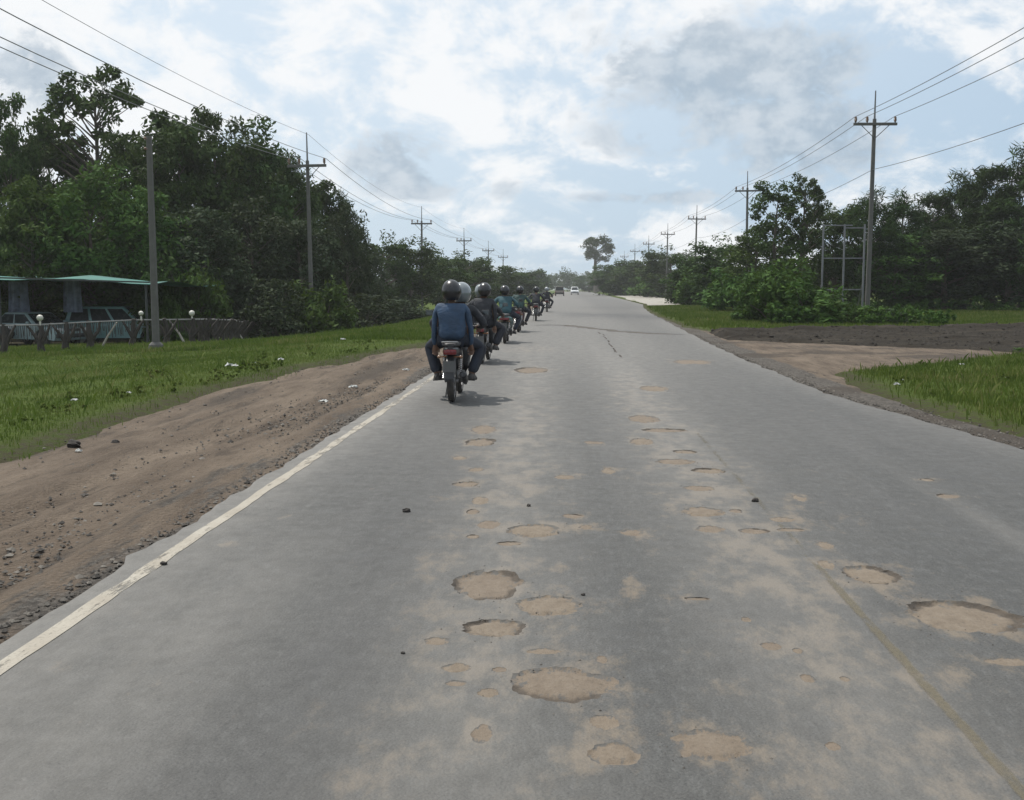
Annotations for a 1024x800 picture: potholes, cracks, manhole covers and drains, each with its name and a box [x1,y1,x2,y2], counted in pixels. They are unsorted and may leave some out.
pothole [471,425,497,434]
pothole [586,742,641,765]
pothole [470,724,493,744]
pothole [462,619,526,637]
pothole [840,565,902,585]
crack [563,325,684,357]
pothole [465,438,496,446]
pothole [670,728,754,762]
pothole [510,666,621,704]
pothole [451,570,525,600]
pothole [514,595,583,616]
pothole [904,600,1024,634]
